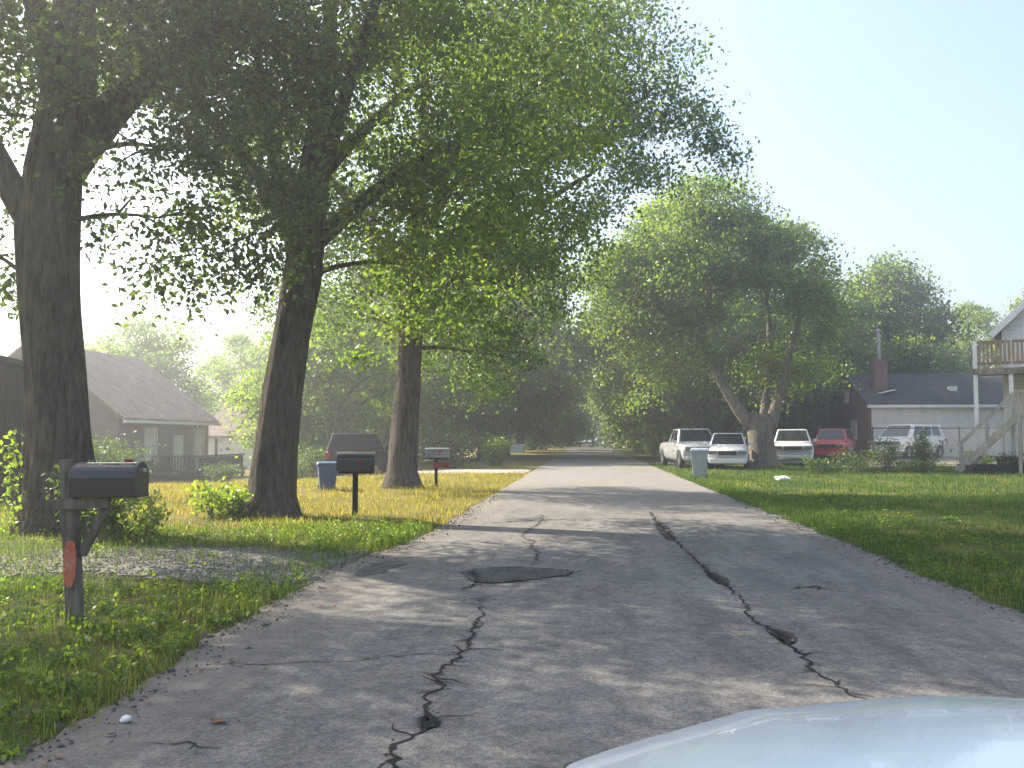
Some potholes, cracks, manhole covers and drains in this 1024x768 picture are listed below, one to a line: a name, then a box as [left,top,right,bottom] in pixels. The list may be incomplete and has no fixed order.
crack [200,514,580,768]
crack [146,741,220,749]
crack [650,511,871,699]
